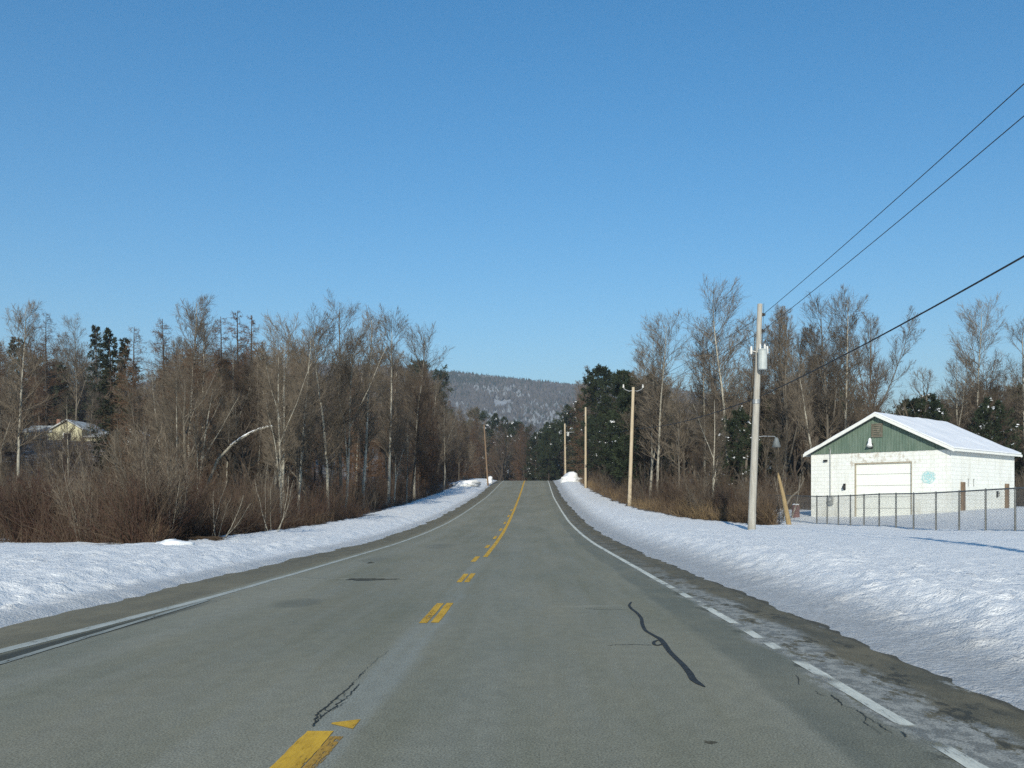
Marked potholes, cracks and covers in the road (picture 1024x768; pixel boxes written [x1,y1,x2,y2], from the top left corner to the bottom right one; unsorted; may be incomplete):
crack [312,650,388,726]
crack [797,676,907,737]
